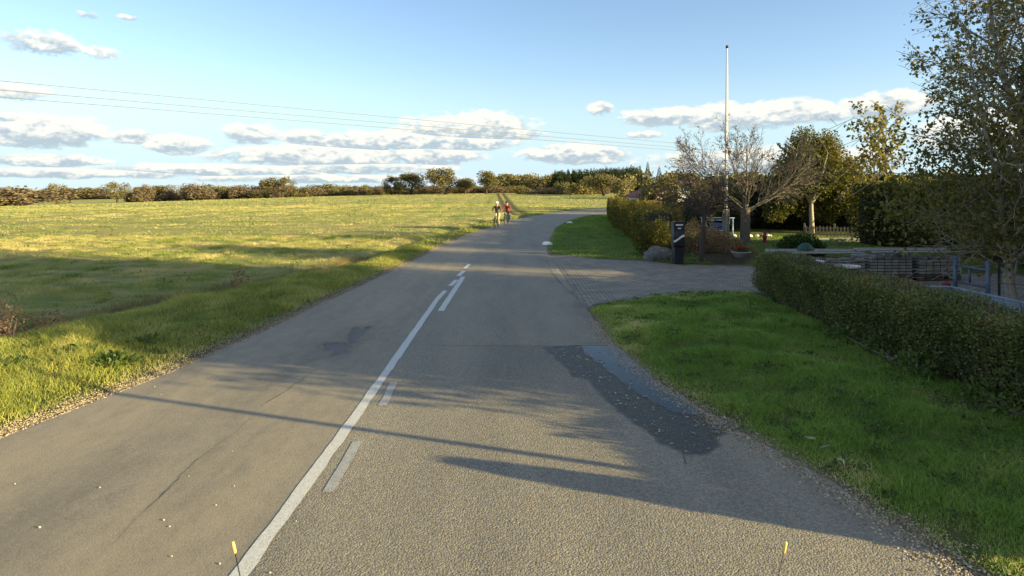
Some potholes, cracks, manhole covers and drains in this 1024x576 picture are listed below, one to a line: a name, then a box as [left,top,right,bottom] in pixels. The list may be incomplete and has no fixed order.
crack [102,367,318,552]
